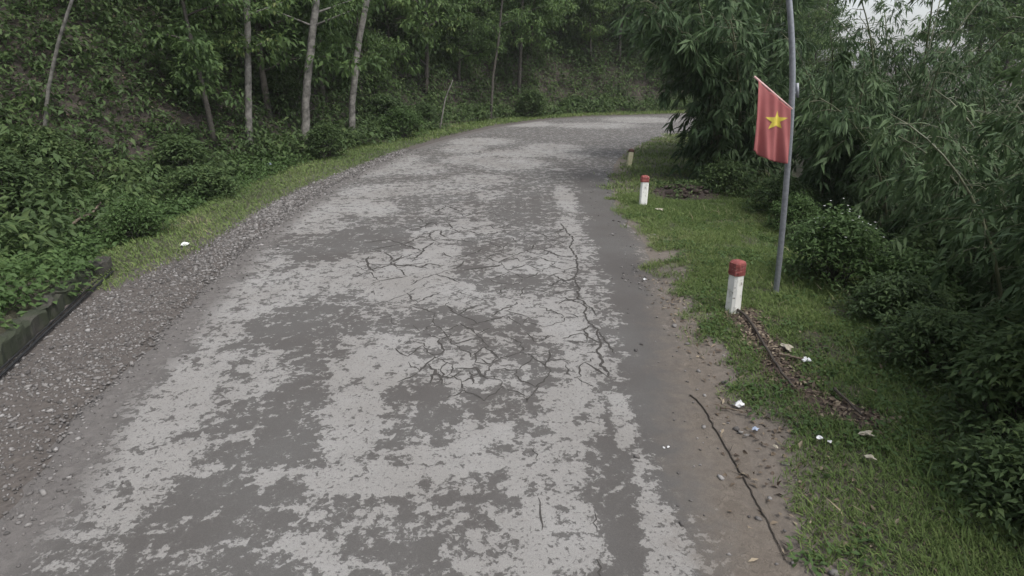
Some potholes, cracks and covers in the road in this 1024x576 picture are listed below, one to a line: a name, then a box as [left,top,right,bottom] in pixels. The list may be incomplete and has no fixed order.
crack [351,206,614,402]
crack [532,447,543,530]
